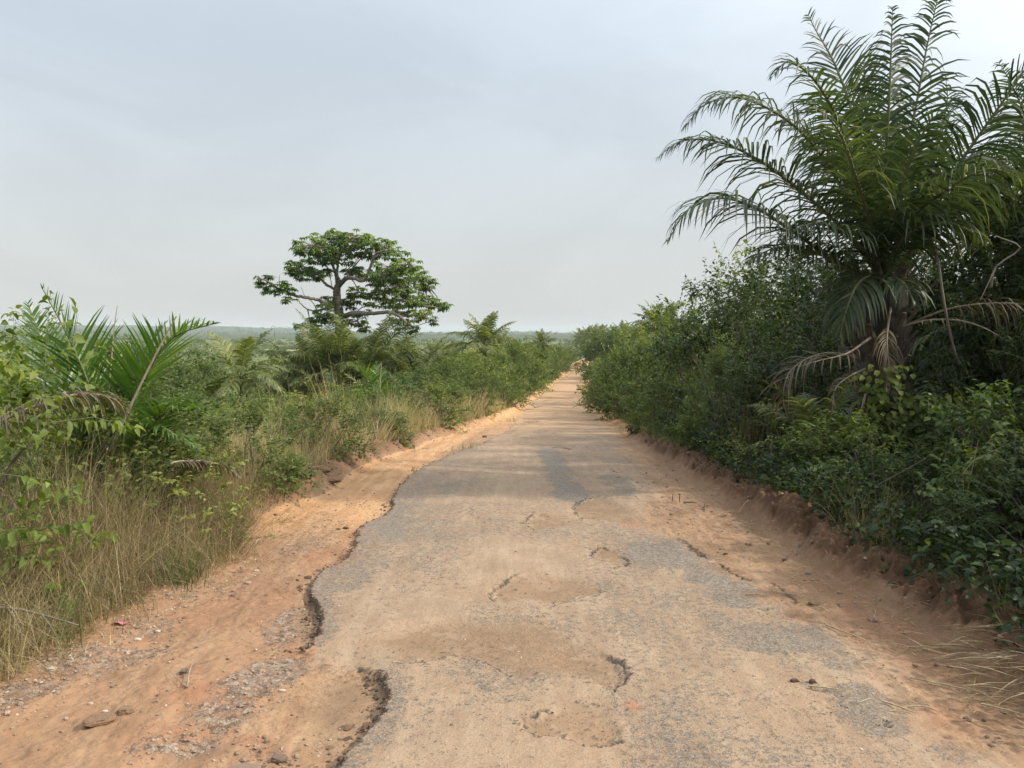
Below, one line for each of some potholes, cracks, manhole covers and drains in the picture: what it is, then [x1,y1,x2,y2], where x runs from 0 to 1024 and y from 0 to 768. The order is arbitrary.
crack [770,582,800,605]
pothole [358,613,627,689]
pothole [593,547,628,567]
pothole [574,496,646,525]
pothole [526,690,631,746]
pothole [527,510,582,529]
pothole [283,594,320,658]
crack [716,562,753,581]
pothole [493,571,608,606]
